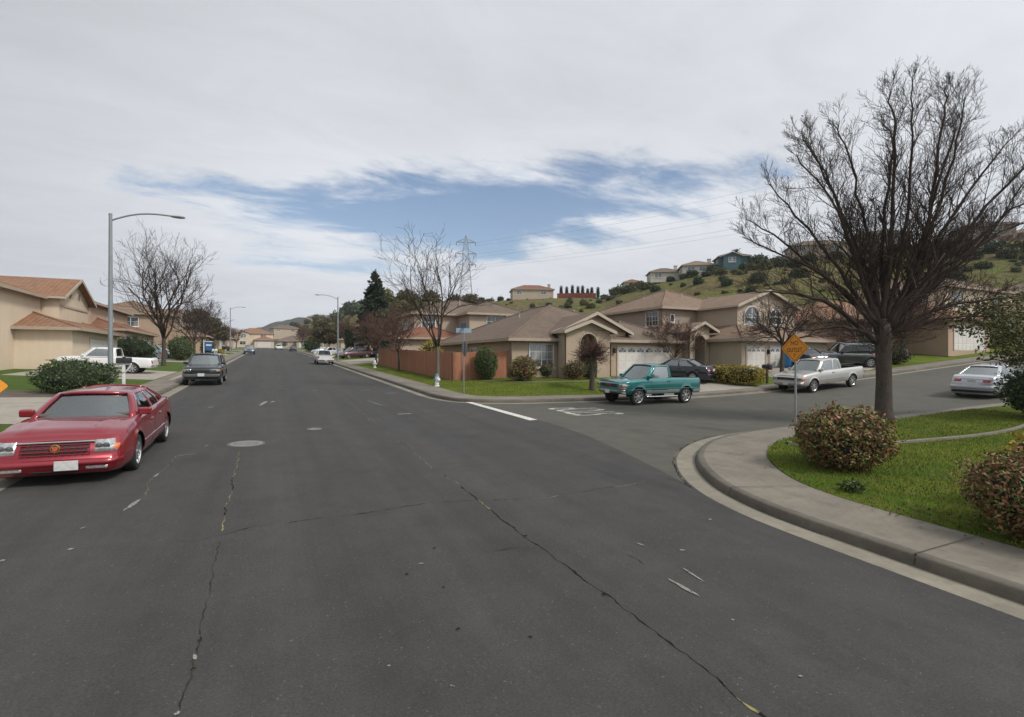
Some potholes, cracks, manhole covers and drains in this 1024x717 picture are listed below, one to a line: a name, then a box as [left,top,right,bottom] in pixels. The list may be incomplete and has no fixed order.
crack [289,406,766,717]
crack [78,452,252,711]
